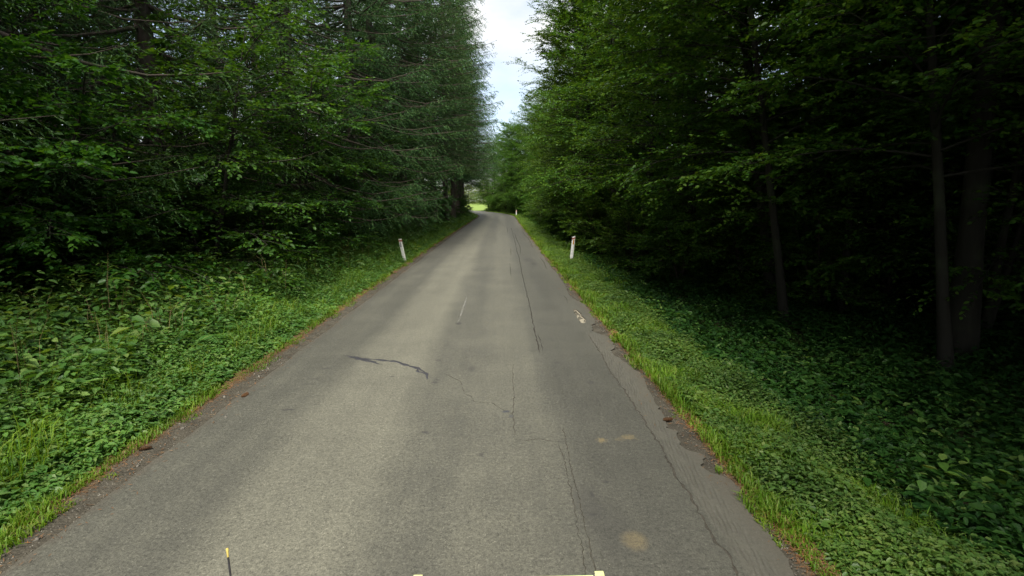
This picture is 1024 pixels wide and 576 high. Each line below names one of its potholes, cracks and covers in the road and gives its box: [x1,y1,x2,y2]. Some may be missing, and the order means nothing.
crack [450,365,604,575]
